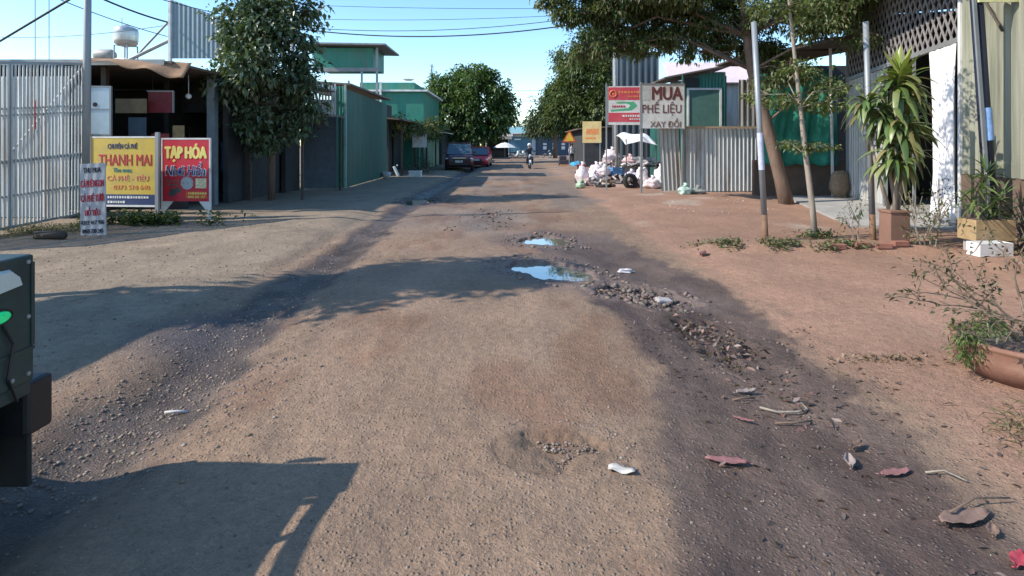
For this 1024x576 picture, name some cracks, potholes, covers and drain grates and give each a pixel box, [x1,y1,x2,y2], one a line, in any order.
pothole [511,234,578,248]
pothole [498,259,607,284]
pothole [581,280,719,313]
pothole [468,418,635,495]
